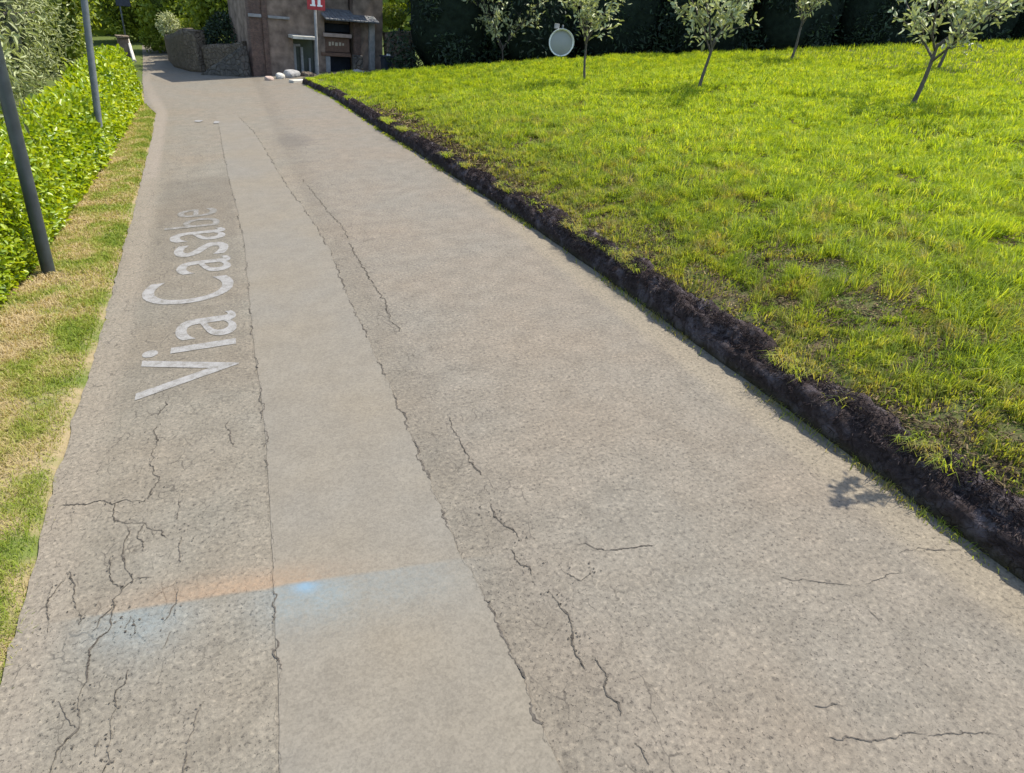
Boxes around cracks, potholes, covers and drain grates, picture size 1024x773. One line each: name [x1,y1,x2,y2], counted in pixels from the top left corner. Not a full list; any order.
crack [819,731,997,742]
crack [40,396,194,773]
crack [303,180,654,765]
crack [778,572,901,585]
crack [180,690,205,772]
